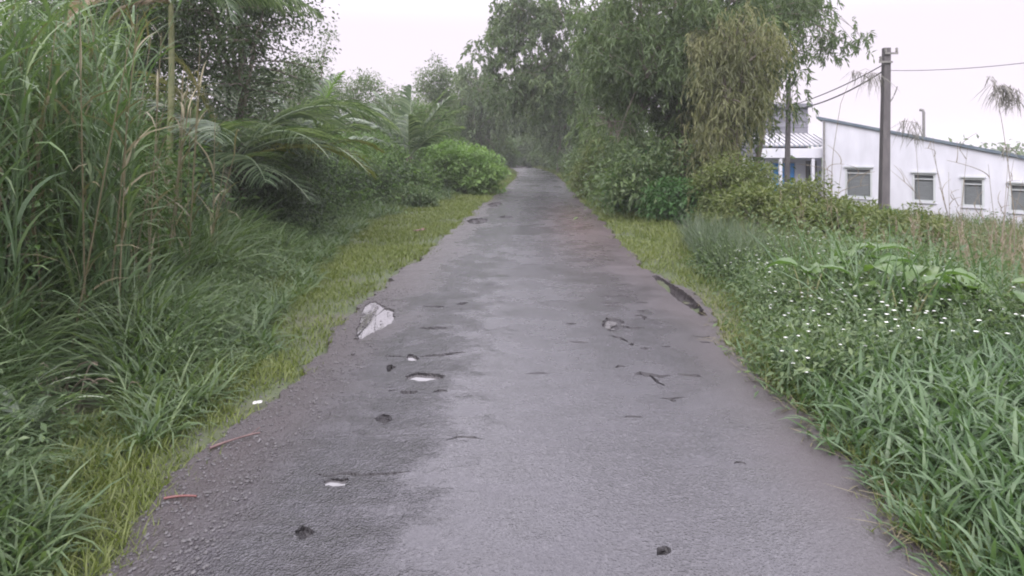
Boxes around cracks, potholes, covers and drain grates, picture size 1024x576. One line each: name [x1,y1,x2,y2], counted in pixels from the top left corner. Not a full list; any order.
pothole [405,372,445,381]
pothole [657,546,671,555]
pothole [323,478,349,486]
pothole [652,275,706,316]
pothole [375,414,392,424]
pothole [295,525,315,539]
pothole [601,317,625,331]
crack [598,290,702,402]
pothole [354,301,395,339]
